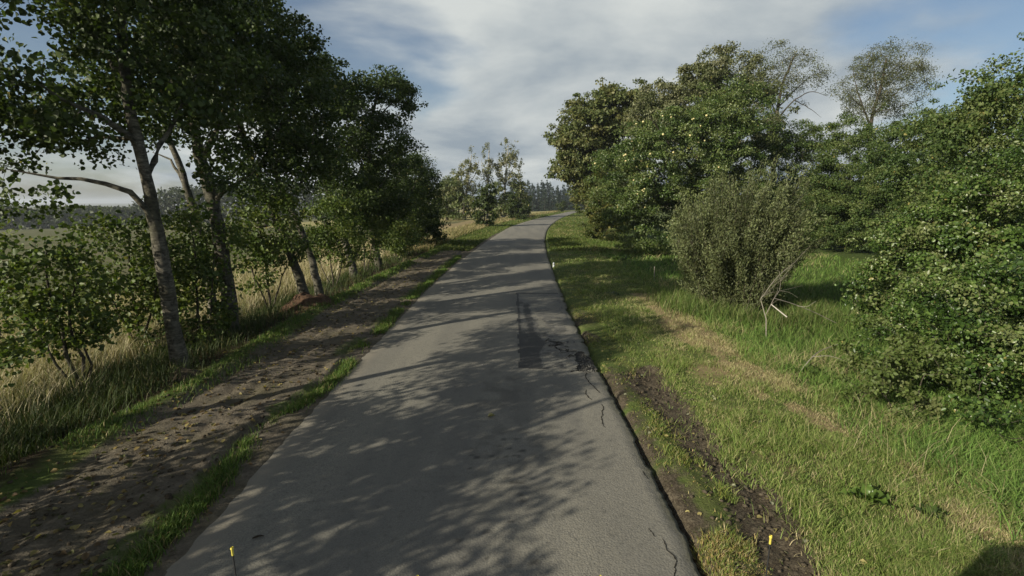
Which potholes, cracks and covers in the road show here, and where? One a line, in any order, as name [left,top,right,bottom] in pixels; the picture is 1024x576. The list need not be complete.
pothole [574,351,597,372]
crack [548,338,605,427]
